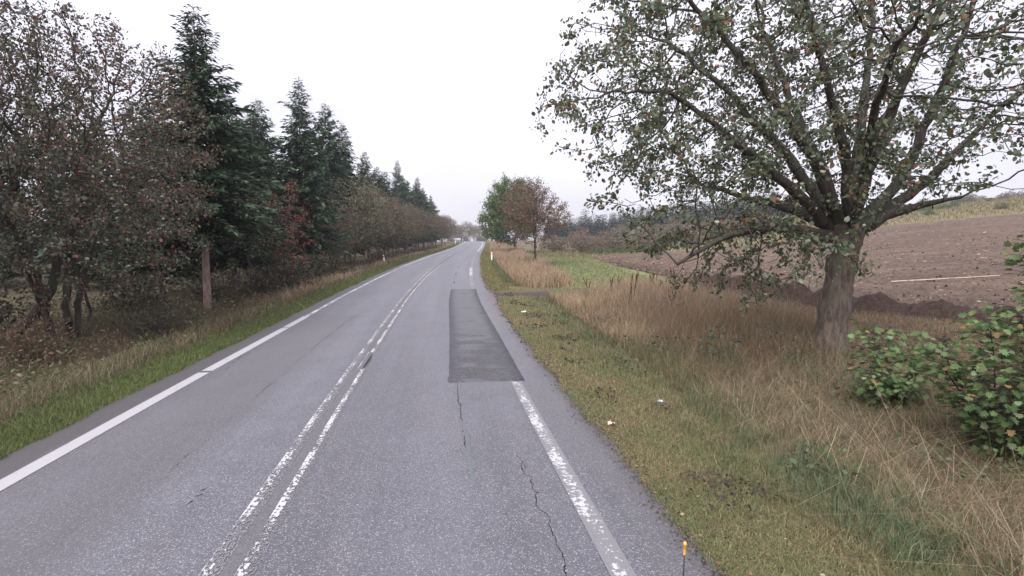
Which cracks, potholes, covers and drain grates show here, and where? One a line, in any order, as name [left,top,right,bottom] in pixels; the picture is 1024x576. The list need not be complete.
crack [517,453,567,576]
crack [457,383,476,485]
